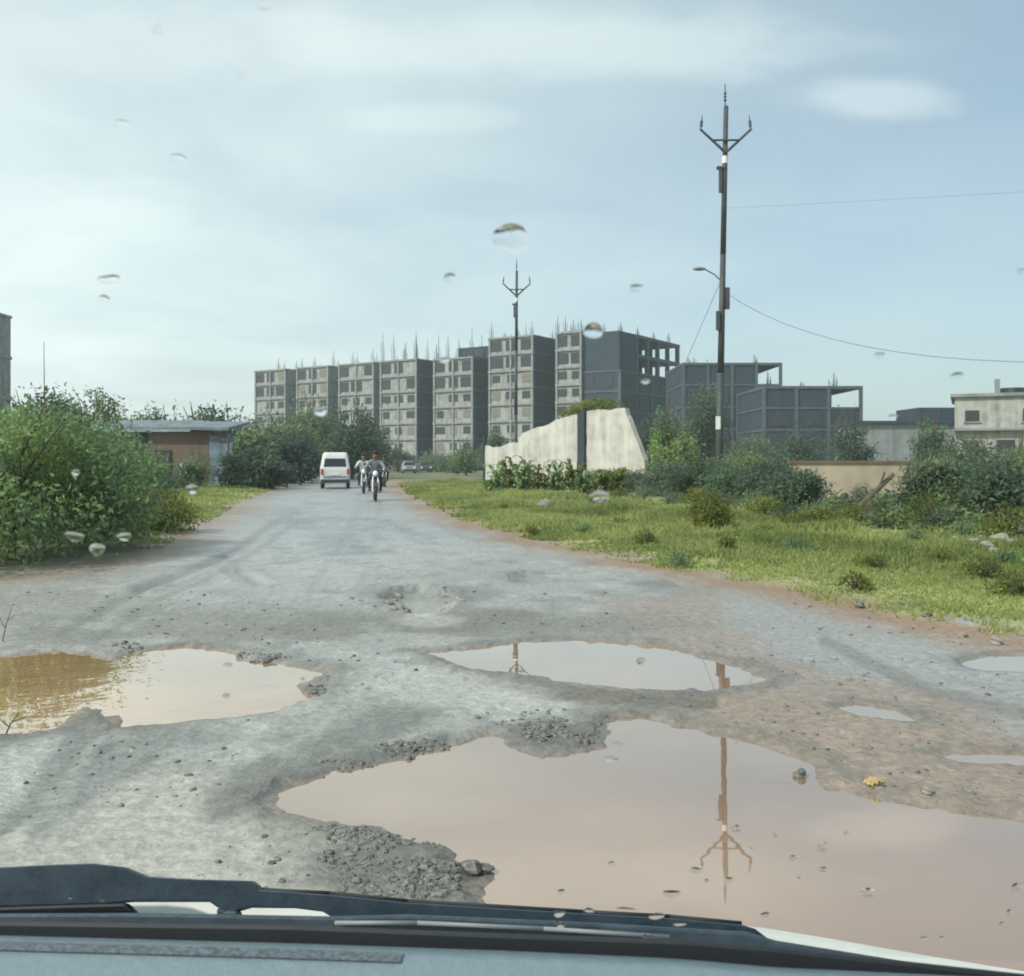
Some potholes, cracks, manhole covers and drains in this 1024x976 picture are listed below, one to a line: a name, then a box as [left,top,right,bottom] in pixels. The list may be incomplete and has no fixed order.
pothole [410,635,777,692]
pothole [0,640,341,734]
pothole [378,583,465,614]
pothole [831,698,925,721]
pothole [955,651,1024,672]
pothole [253,708,1024,971]
